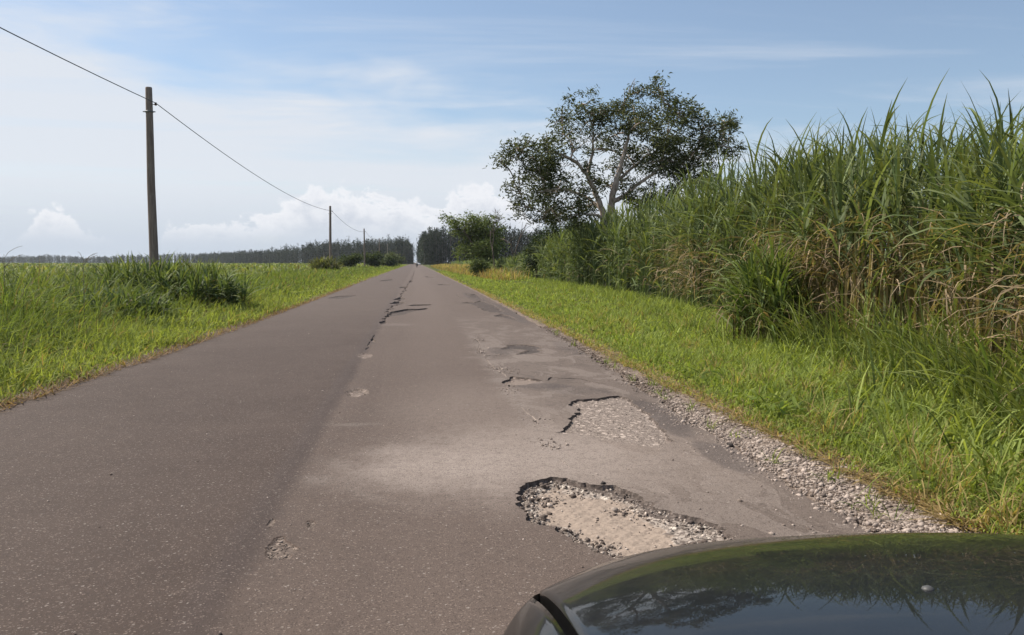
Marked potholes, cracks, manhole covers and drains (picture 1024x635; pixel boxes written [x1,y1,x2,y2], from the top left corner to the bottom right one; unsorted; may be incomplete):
pothole [345,388,369,397]
pothole [264,536,301,560]
crack [365,271,415,350]
pothole [515,477,735,559]
pothole [556,396,673,455]
pothole [502,376,542,385]
pothole [501,344,543,355]
